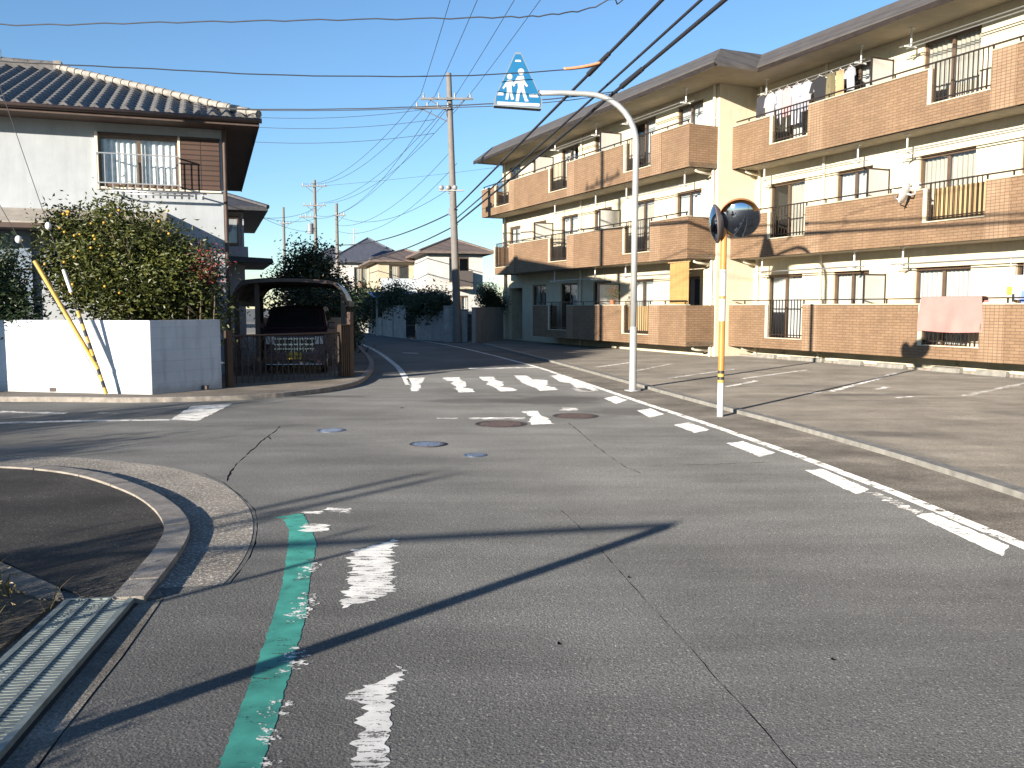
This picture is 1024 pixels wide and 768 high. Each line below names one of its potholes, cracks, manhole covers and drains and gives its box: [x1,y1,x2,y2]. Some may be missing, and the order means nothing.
manhole cover [475,420,527,428]
drain grate [0,597,138,767]
crack [206,426,280,582]
